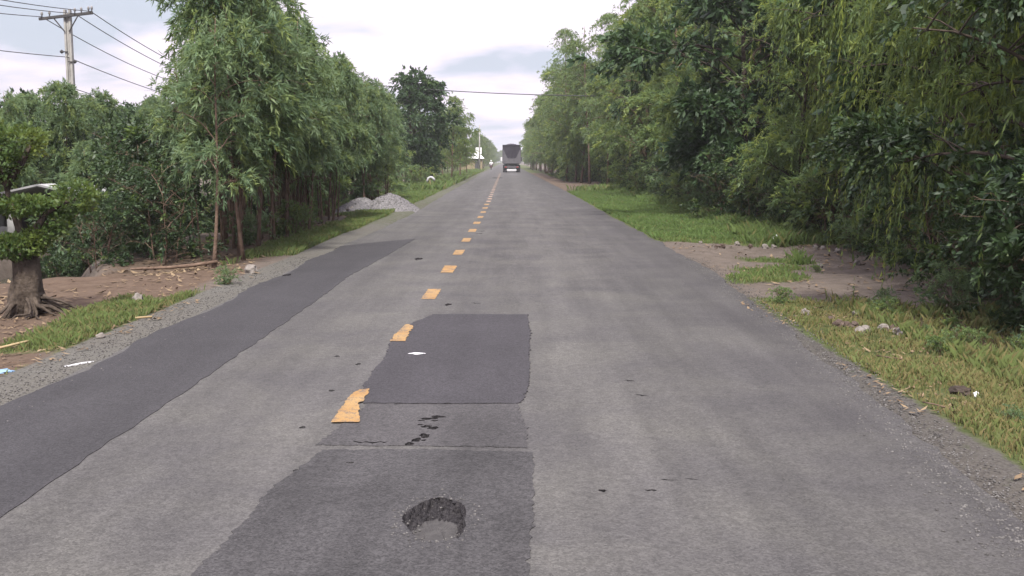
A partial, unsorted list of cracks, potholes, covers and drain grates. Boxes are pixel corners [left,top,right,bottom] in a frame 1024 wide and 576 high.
pothole [391,488,486,554]
pothole [405,415,446,445]
